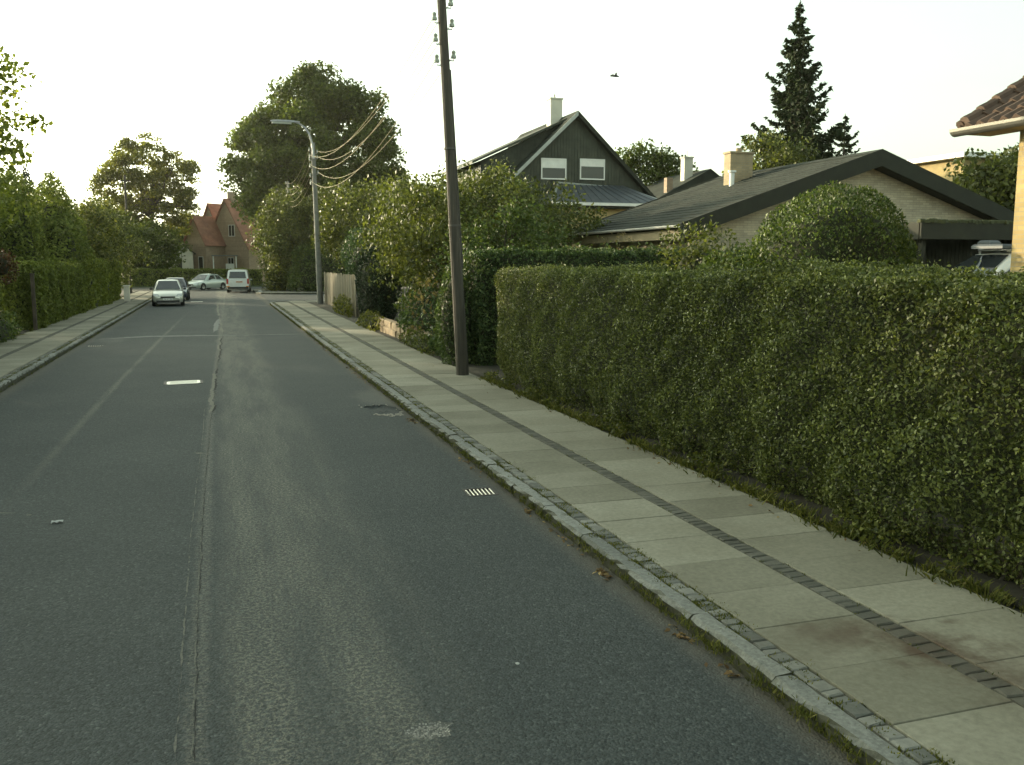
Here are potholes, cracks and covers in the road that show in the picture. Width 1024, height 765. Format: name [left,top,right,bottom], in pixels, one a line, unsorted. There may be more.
drain grate [462,487,499,497]
pothole [358,404,403,417]
